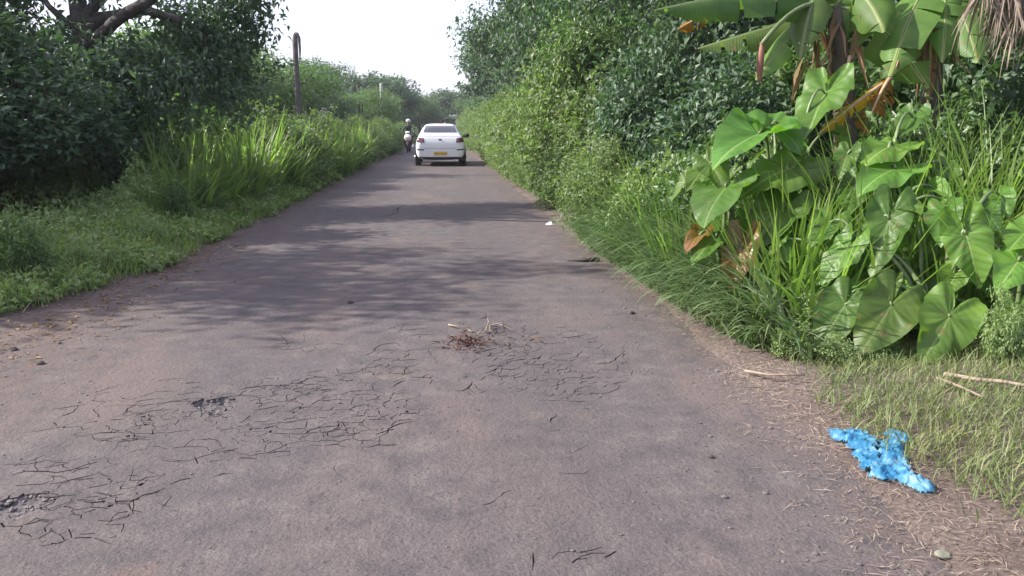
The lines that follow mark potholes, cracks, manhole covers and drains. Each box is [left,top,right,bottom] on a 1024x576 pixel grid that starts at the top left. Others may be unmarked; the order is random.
pothole [0,493,55,521]
crack [0,455,232,546]
crack [555,546,616,564]
crack [460,327,633,453]
crack [20,343,447,472]
crack [266,335,343,352]
pothole [191,397,238,416]
